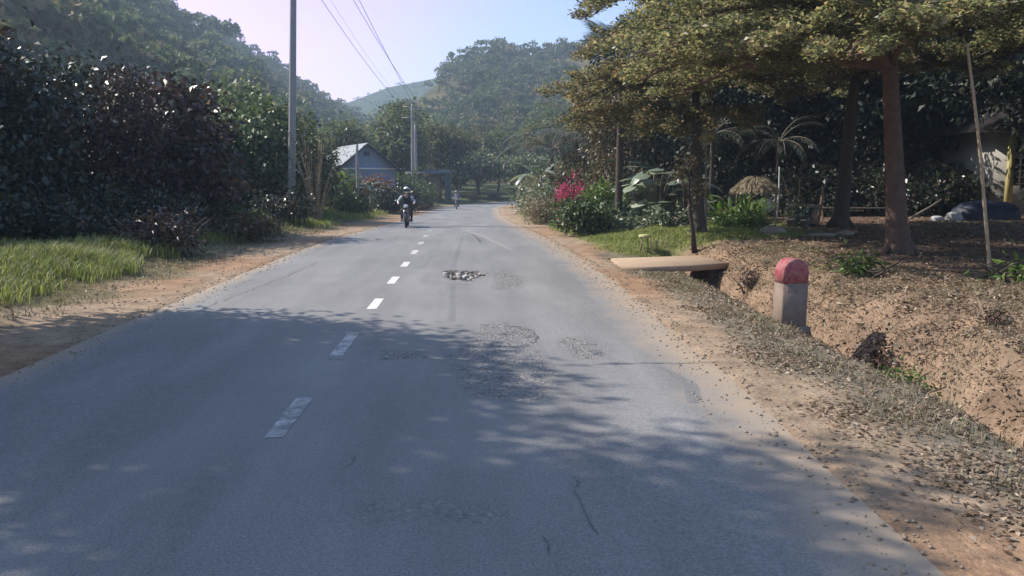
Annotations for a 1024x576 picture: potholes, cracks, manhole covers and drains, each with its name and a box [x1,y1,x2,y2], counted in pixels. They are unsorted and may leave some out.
crack [573,476,598,533]
pothole [438,269,496,284]
